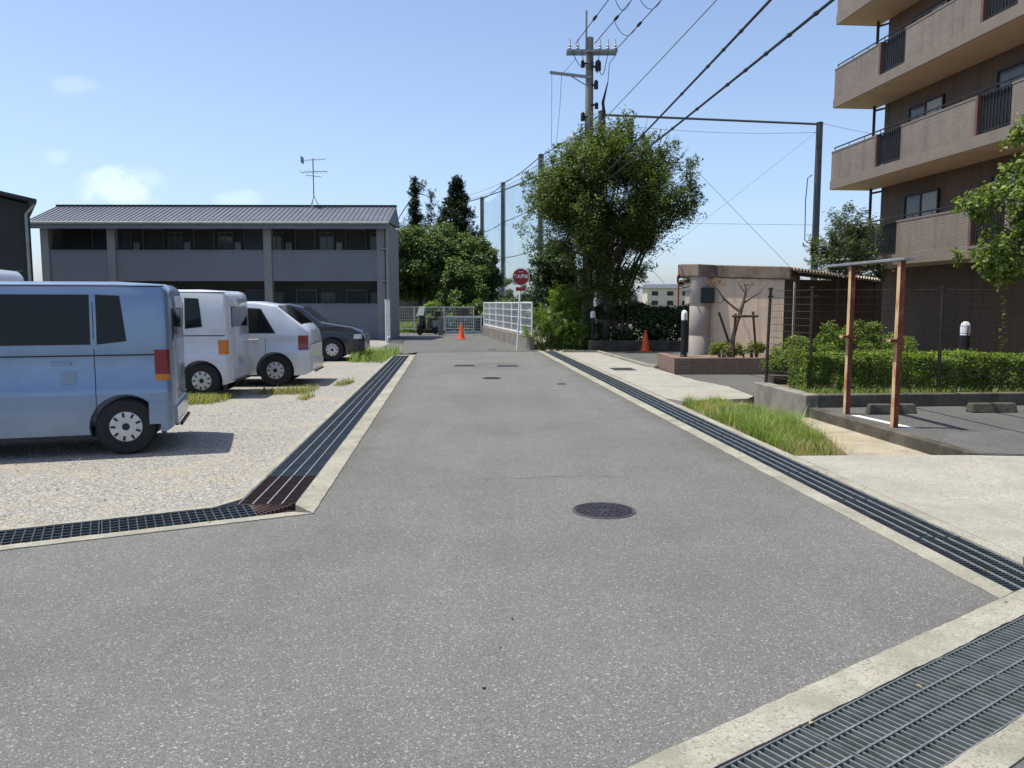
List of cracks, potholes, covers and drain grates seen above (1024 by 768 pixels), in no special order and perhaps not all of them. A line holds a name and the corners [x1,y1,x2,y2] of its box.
drain grate [291,437,347,455]
drain grate [630,395,666,403]
drain grate [945,616,1024,685]
drain grate [248,504,292,516]
drain grate [720,728,879,768]
drain grate [308,424,357,438]
drain grate [741,451,817,472]
drain grate [781,472,876,500]
drain grate [101,504,258,534]
manhole cover [572,502,636,519]
drain grate [663,411,708,422]
drain grate [0,521,100,545]
